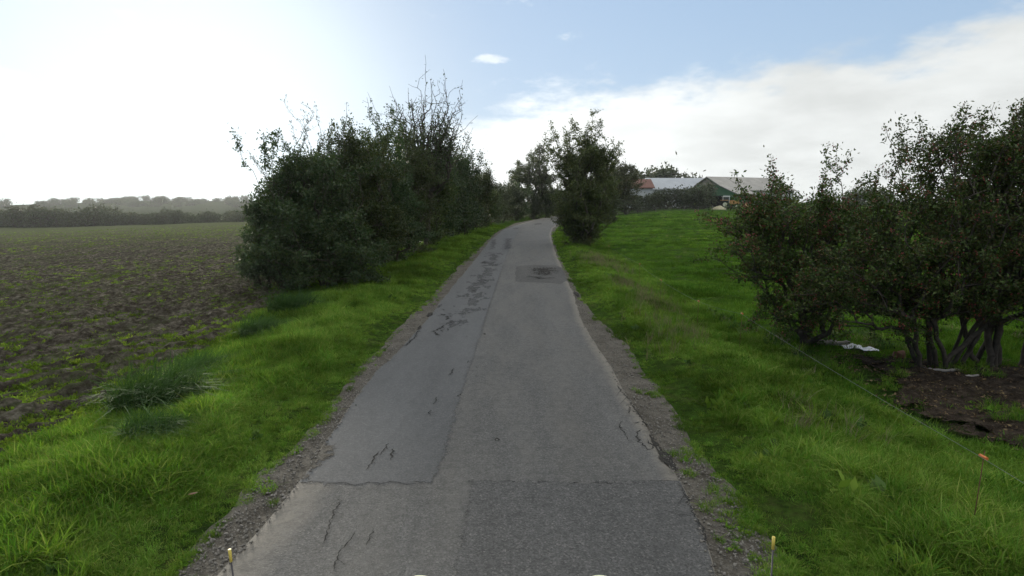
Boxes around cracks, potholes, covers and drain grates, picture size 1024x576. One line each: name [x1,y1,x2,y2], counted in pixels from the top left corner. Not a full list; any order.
crack [613,387,654,450]
crack [399,290,475,346]
crack [367,443,395,469]
crack [324,502,374,569]
